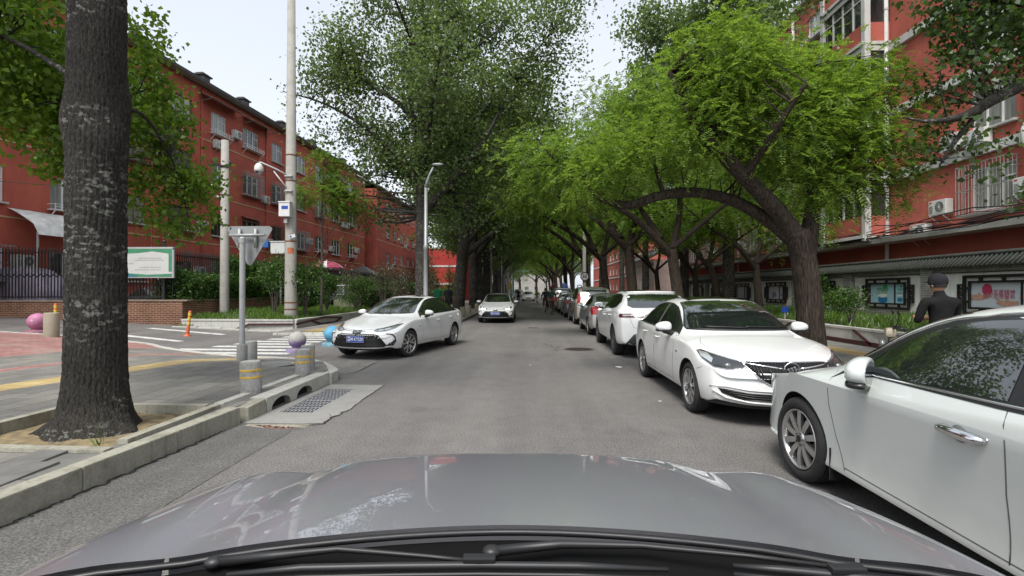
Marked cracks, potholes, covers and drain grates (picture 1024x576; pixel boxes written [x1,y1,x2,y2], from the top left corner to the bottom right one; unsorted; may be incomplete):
drain grate [281,389,352,412]
